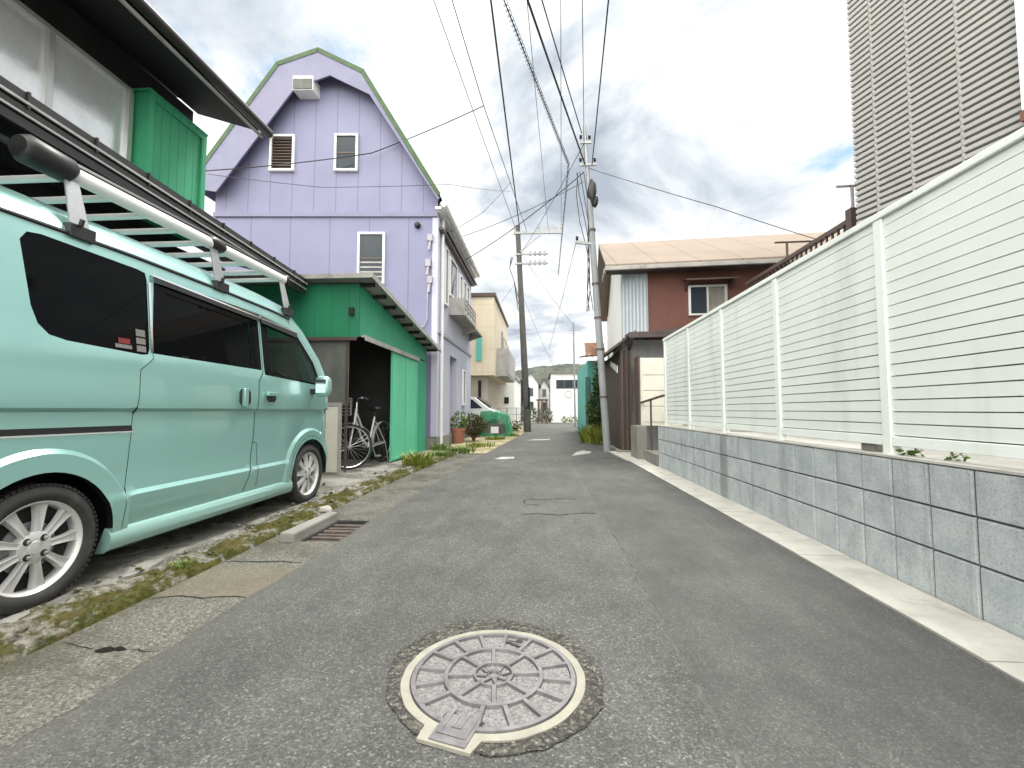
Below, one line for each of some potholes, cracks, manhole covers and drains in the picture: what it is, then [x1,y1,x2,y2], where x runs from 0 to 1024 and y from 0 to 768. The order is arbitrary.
crack [520,479,596,516]
manhole cover [386,619,604,757]
drain grate [300,521,369,549]
crack [63,642,154,652]
